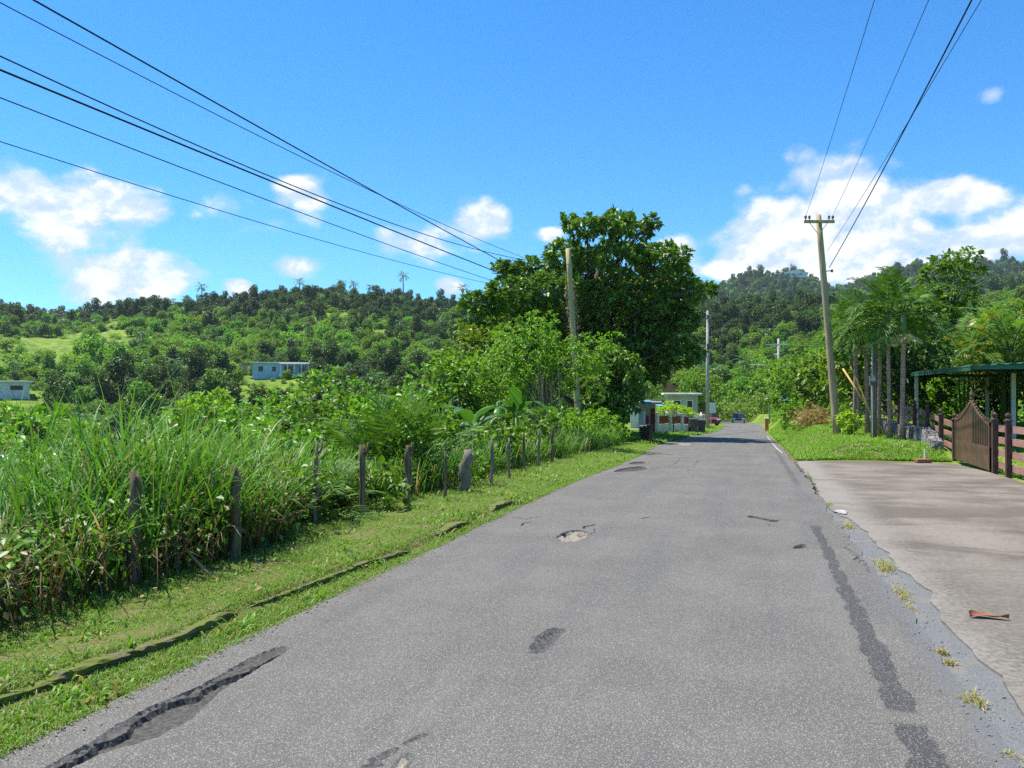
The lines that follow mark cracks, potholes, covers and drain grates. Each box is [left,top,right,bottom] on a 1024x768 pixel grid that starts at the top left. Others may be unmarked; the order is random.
pothole [44,646,290,768]
pothole [555,524,596,542]
